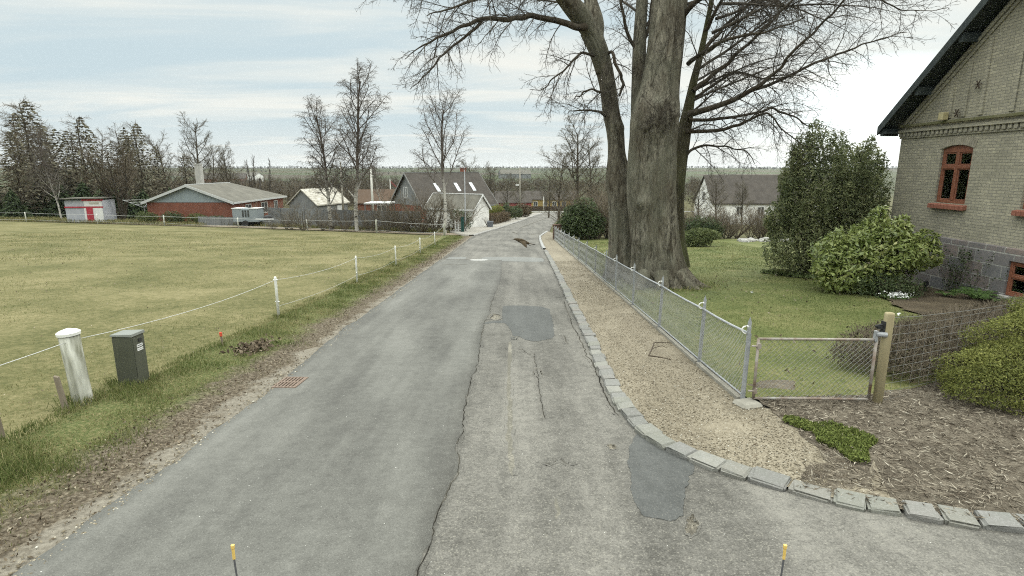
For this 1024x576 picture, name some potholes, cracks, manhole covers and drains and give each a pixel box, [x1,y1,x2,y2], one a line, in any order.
pothole [683,511,701,538]
crack [415,265,623,576]
drain grate [271,377,309,389]
